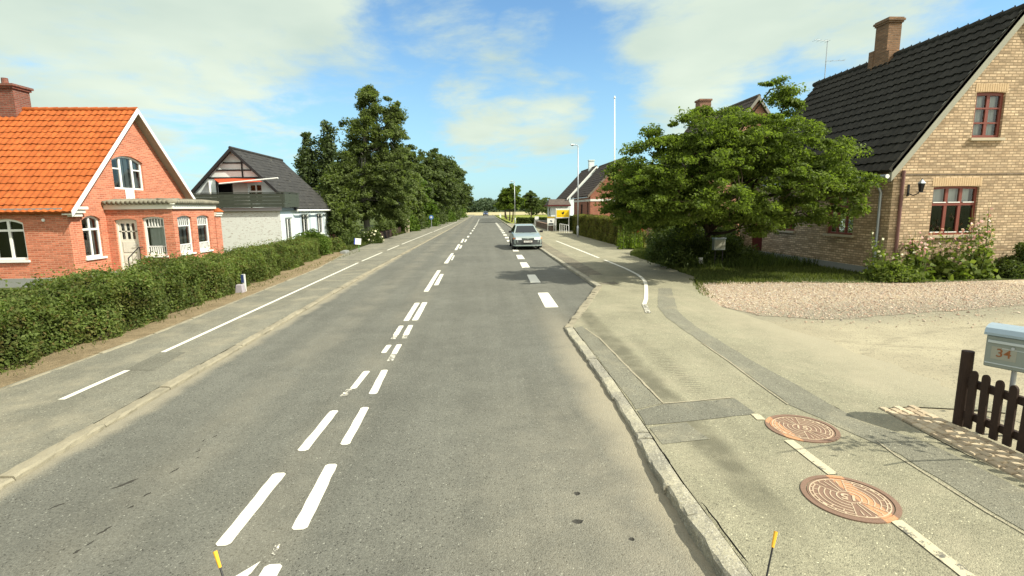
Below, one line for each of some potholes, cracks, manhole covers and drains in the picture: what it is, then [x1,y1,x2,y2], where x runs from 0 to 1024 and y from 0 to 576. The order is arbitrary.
manhole cover [800,475,902,524]
crack [73,435,217,554]
manhole cover [765,414,841,443]
